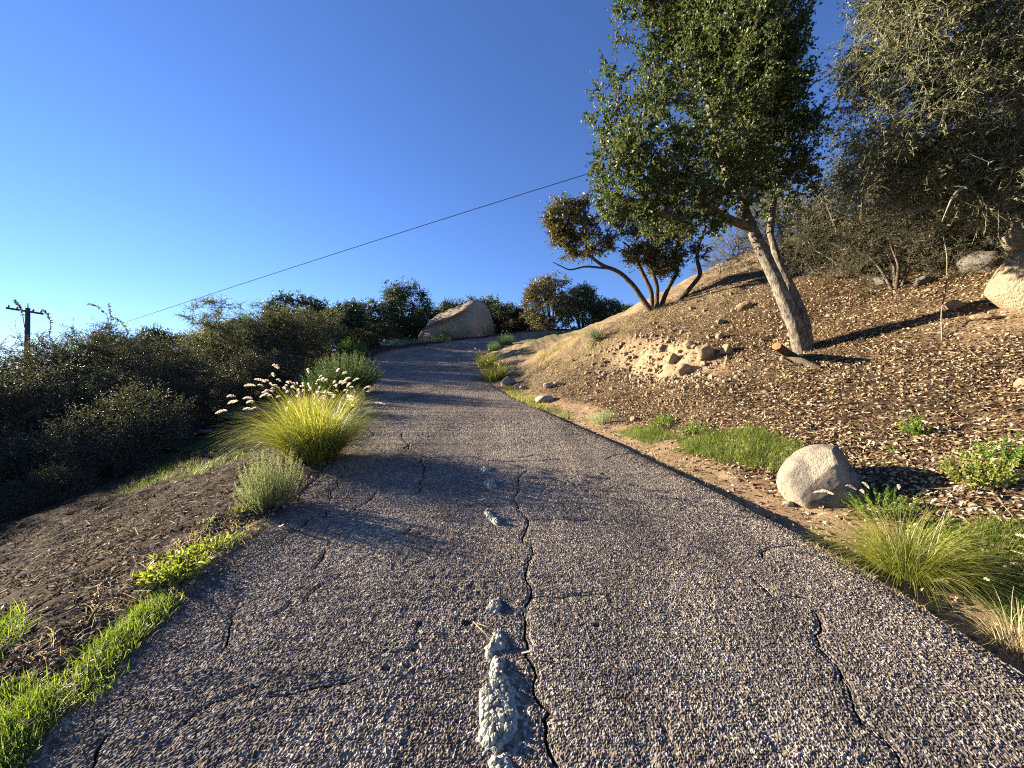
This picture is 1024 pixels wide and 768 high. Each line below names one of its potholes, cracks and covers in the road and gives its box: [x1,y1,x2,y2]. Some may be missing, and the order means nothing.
crack [814,615,904,768]
crack [283,417,611,768]
crack [93,738,107,768]
crack [186,681,356,725]
